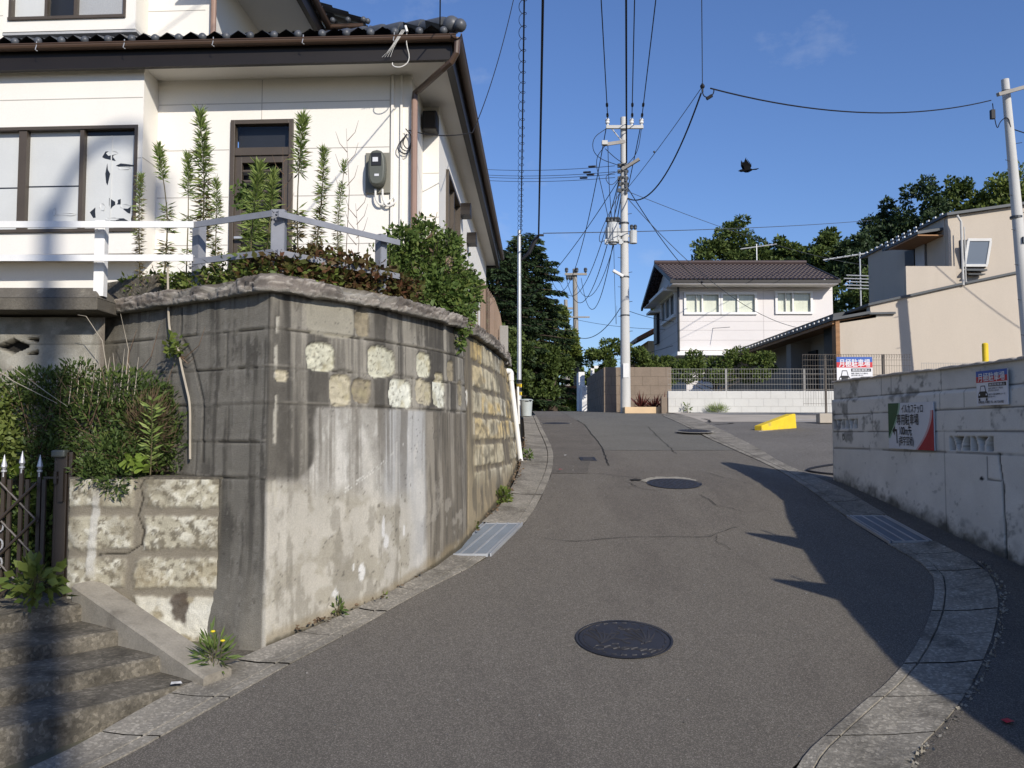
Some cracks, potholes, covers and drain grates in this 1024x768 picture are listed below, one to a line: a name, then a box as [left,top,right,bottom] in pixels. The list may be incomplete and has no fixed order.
manhole cover [642,477,702,489]
drain grate [453,522,523,558]
crack [546,494,740,550]
manhole cover [576,620,673,658]
drain grate [847,515,932,544]
crack [579,421,664,490]
